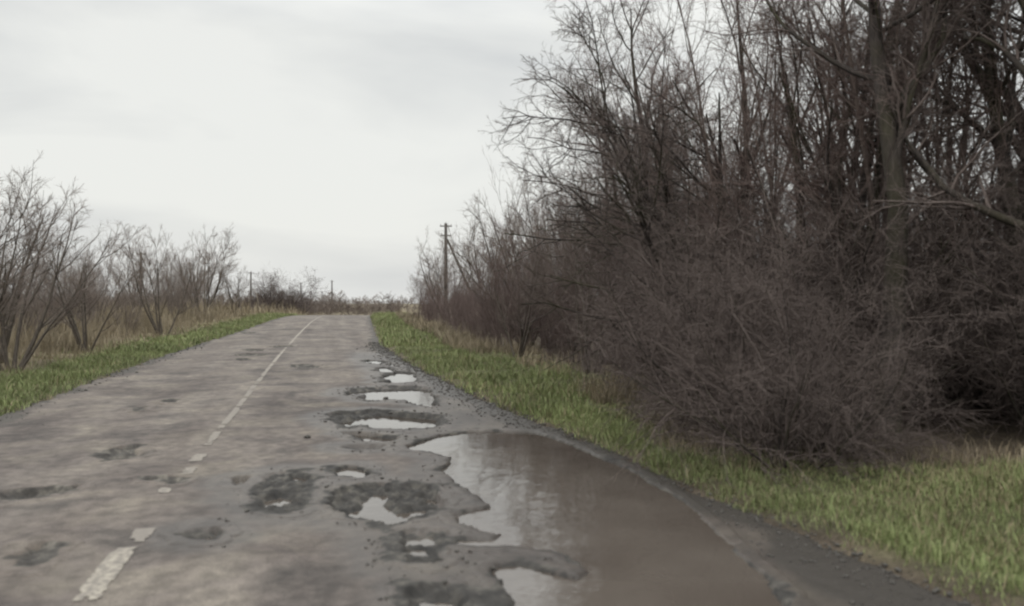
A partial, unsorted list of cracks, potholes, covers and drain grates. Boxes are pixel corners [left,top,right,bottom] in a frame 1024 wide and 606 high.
pothole [369,370,427,384]
